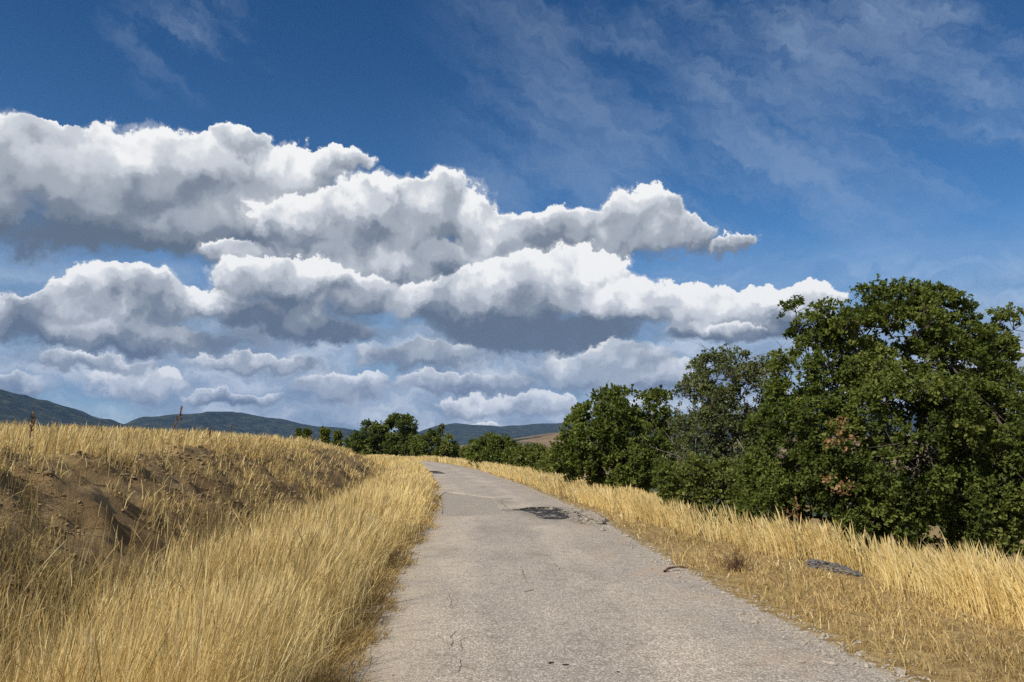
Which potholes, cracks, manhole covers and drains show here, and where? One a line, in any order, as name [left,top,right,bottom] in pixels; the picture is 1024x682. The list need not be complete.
pothole [572,508,609,525]
crack [449,631,471,672]
crack [522,553,560,592]
